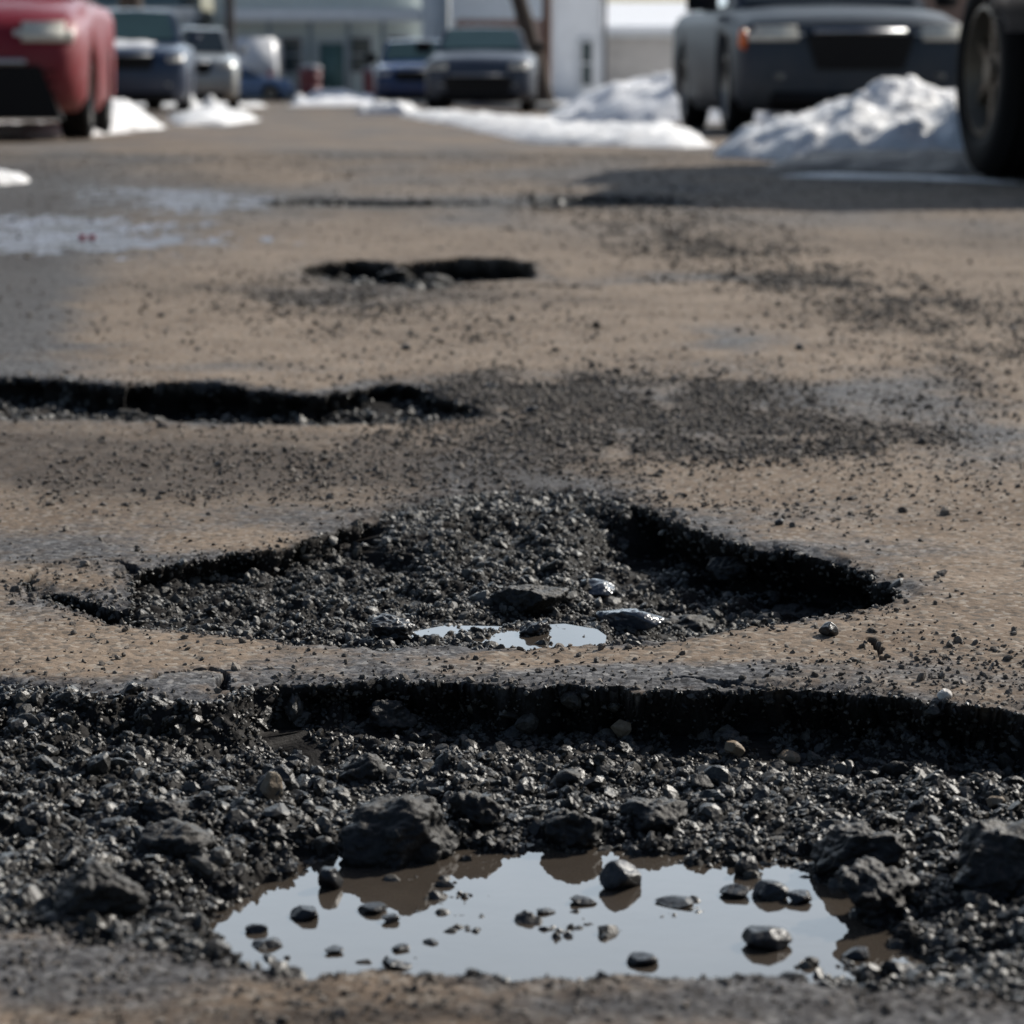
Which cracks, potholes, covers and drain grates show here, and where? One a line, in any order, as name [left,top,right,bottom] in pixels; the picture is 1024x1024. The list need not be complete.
pothole [0,677,1024,1001]
pothole [0,378,486,426]
pothole [22,490,905,651]
pothole [295,258,539,289]
